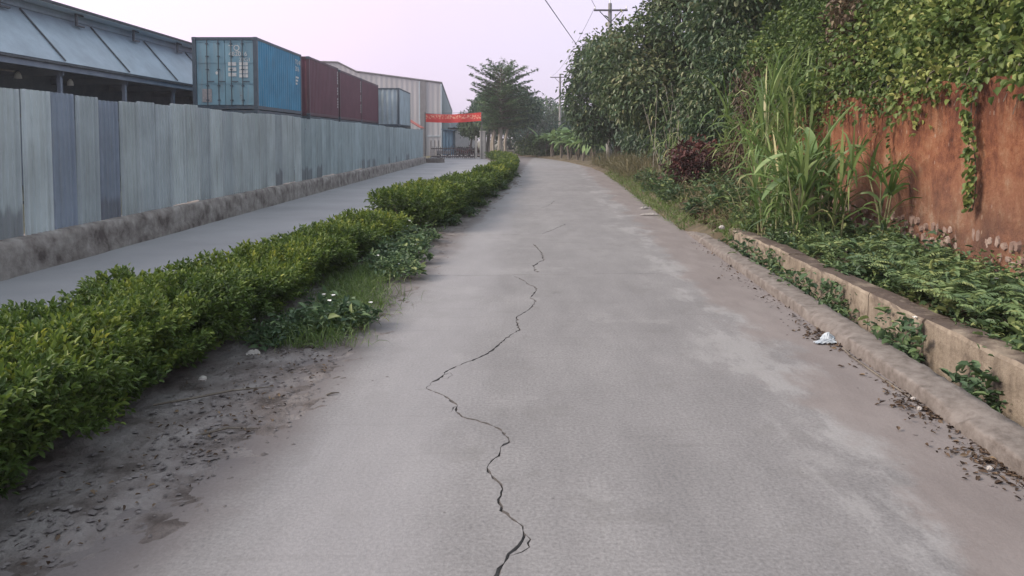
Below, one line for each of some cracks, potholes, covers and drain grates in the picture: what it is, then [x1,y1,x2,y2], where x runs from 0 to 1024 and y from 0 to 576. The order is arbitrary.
crack [426,224,691,576]
